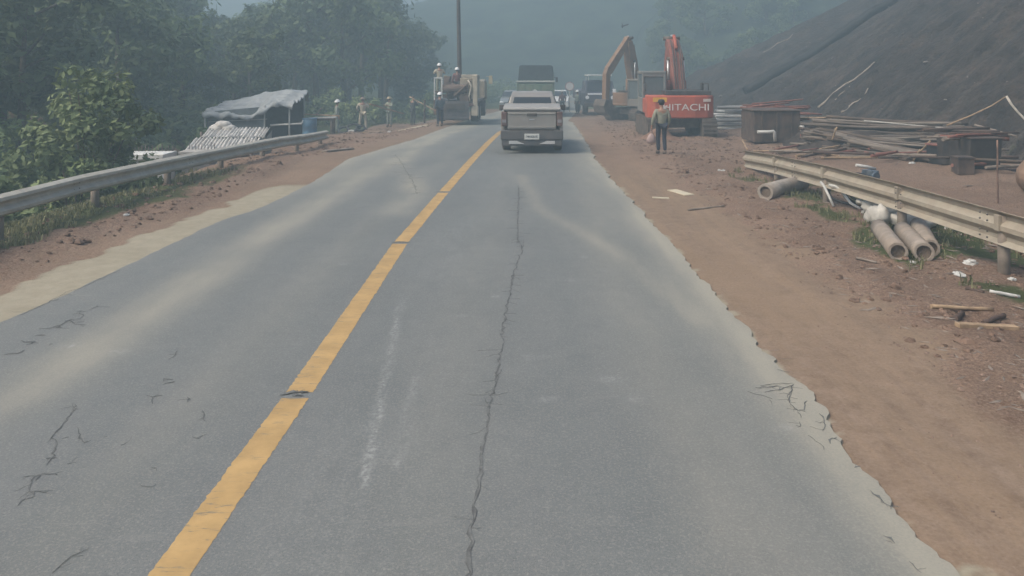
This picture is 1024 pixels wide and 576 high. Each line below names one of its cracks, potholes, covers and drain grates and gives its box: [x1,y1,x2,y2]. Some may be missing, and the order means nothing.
crack [141,351,205,487]
crack [748,350,839,448]
crack [453,185,530,576]
crack [16,404,126,505]
crack [5,306,103,355]
